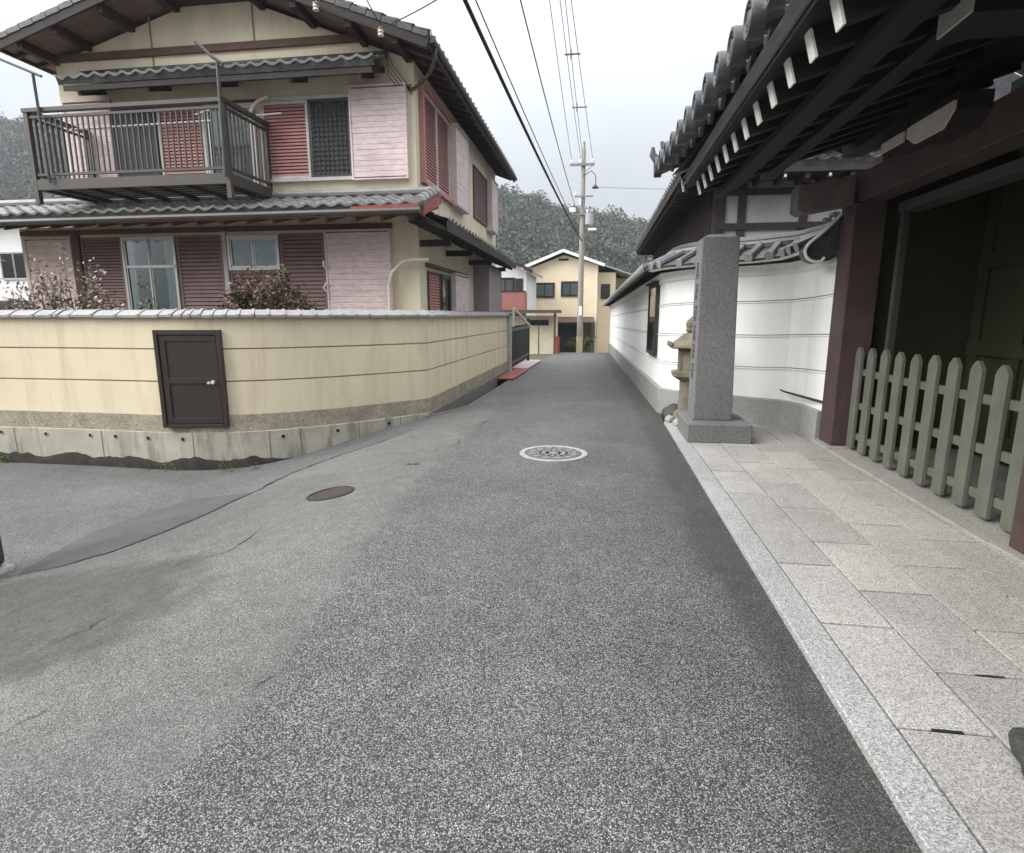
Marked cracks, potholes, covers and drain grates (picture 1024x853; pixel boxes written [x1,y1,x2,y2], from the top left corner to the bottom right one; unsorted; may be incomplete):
manhole cover [306,486,354,501]
manhole cover [520,445,587,462]
